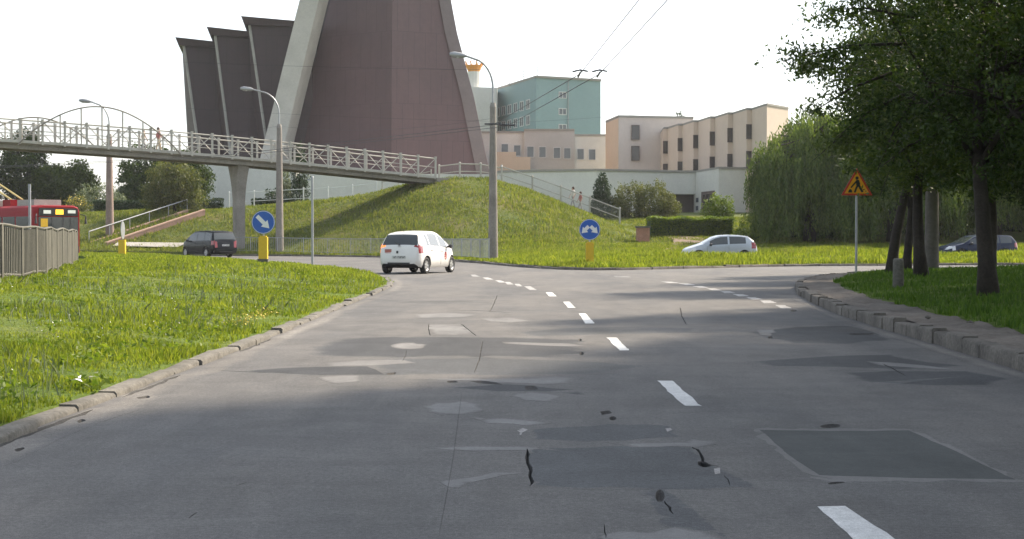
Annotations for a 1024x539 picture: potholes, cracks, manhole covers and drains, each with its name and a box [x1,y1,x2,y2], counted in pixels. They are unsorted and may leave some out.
crack [525,447,752,490]
crack [461,301,509,373]
